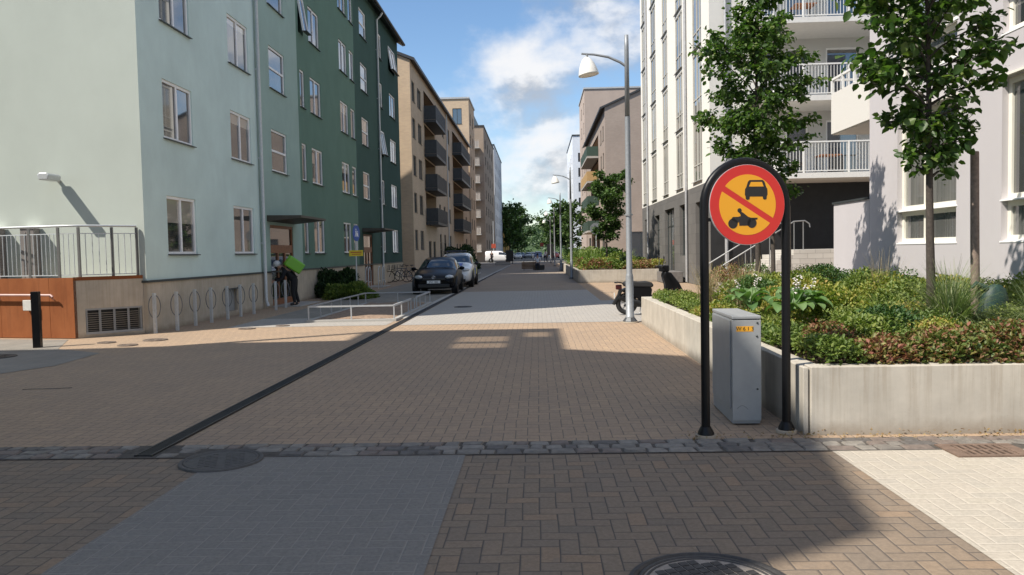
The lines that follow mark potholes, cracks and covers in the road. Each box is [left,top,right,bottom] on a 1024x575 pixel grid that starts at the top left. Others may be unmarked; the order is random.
manhole cover [629,552,786,575]
manhole cover [177,449,264,473]
drain grate [934,443,1024,458]
